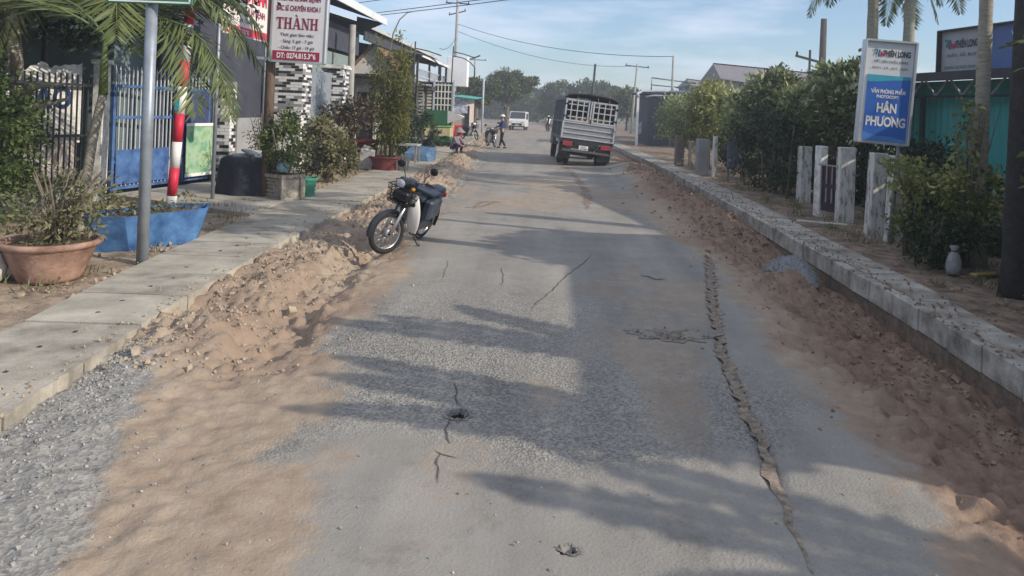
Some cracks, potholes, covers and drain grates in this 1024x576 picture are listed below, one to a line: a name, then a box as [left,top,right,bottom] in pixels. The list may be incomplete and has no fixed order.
crack [435,383,458,481]
crack [703,254,814,573]
crack [533,257,589,306]
pothole [442,406,474,422]
pothole [558,543,580,556]
